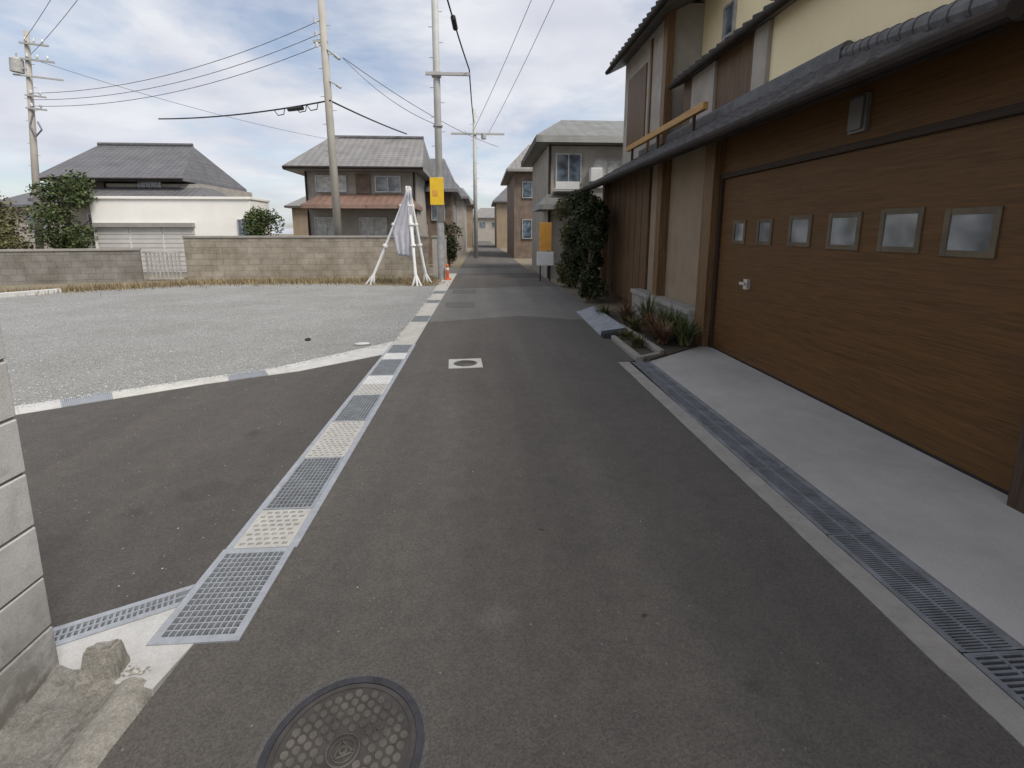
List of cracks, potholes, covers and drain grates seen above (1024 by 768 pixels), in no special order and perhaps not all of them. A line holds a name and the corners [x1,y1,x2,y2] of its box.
drain grate [228,369,268,381]
drain grate [827,533,1024,654]
drain grate [333,394,382,422]
drain grate [53,584,195,647]
drain grate [962,650,1024,709]
drain grate [751,467,873,536]
drain grate [263,457,344,510]
drain grate [633,362,665,375]
manhole cover [250,672,430,768]
utility cover [449,358,483,369]
drain grate [146,547,295,646]
drain grate [703,425,787,469]
